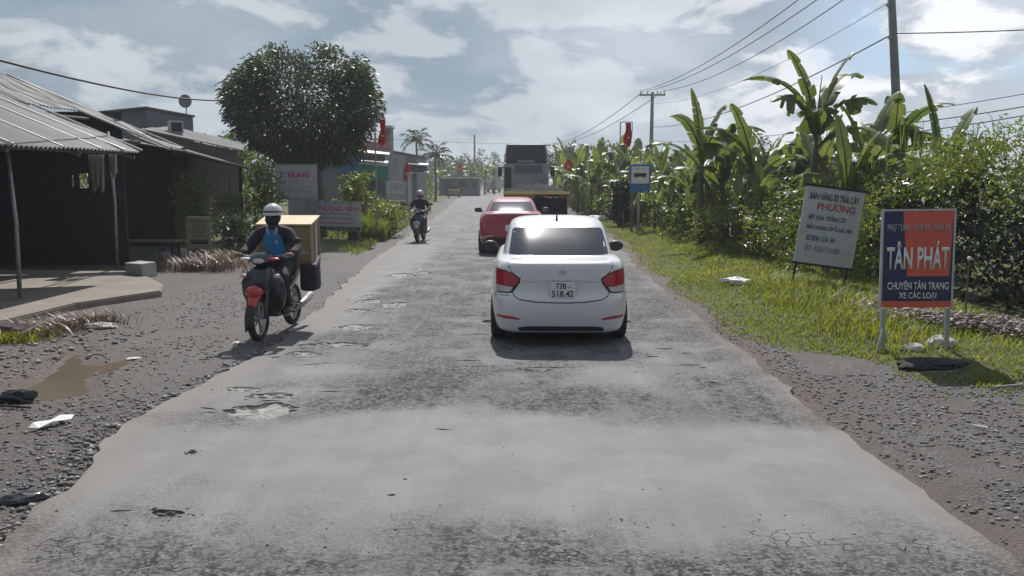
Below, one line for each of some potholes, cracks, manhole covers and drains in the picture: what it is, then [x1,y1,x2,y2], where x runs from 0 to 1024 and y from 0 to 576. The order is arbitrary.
crack [21,532,116,566]
pothole [222,402,301,419]
pothole [151,509,185,517]
crack [750,529,862,554]
crack [897,536,931,553]
crack [555,549,595,567]
